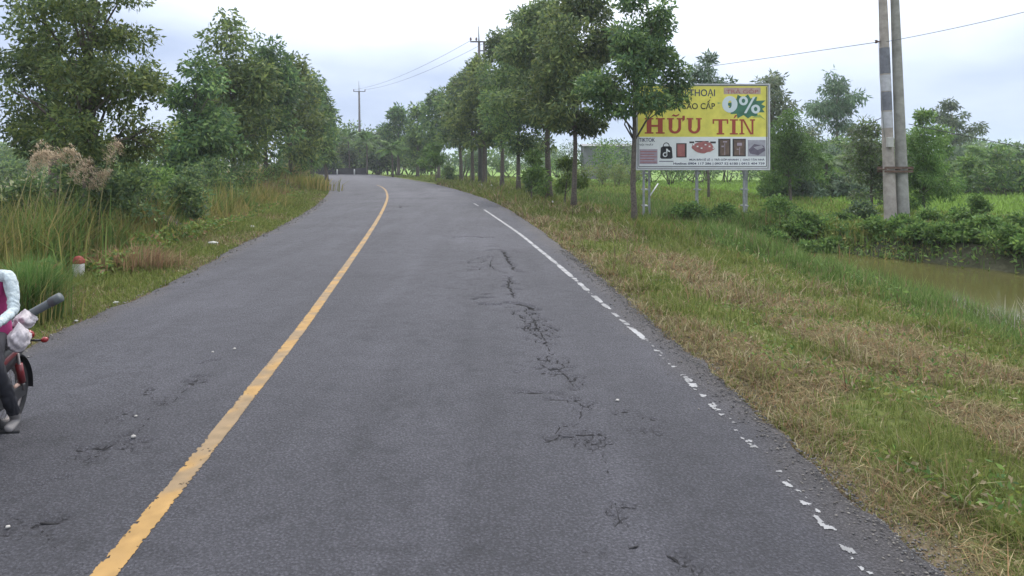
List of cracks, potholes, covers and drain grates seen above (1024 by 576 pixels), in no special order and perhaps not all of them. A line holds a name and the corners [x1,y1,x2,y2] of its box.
crack [4,518,62,548]
crack [31,362,208,488]
crack [587,546,712,576]
crack [467,252,636,527]
